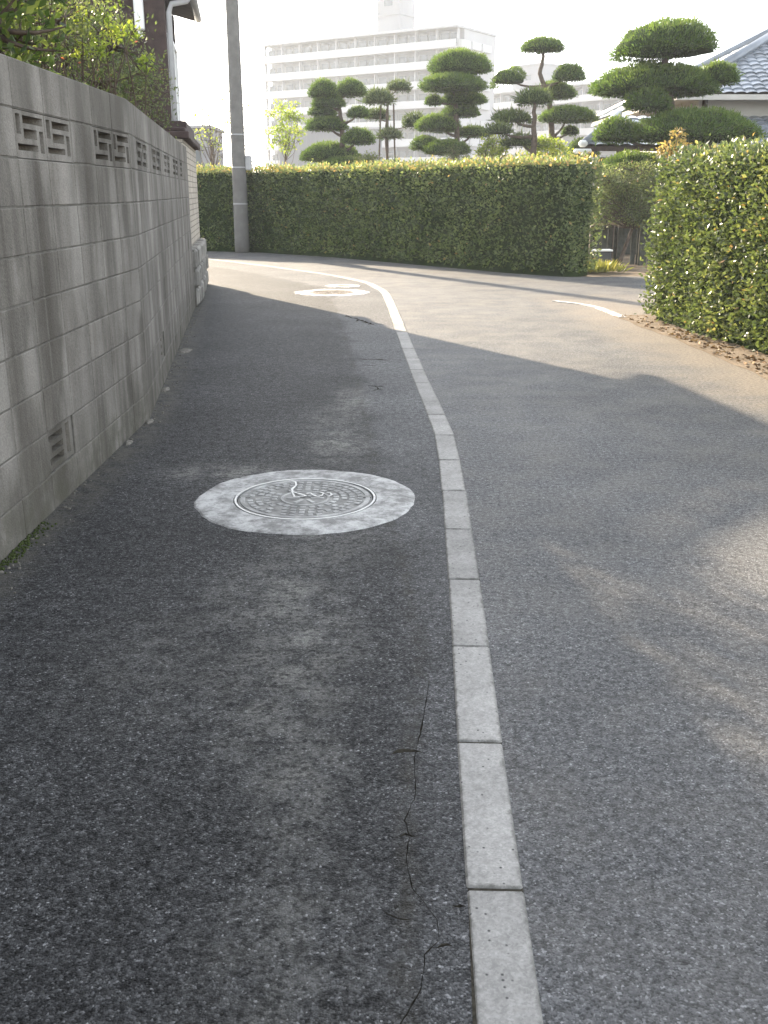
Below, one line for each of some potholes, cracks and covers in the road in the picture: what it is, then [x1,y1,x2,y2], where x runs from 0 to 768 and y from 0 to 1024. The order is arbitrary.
crack [384,684,464,1024]
manhole cover [194,470,415,535]
